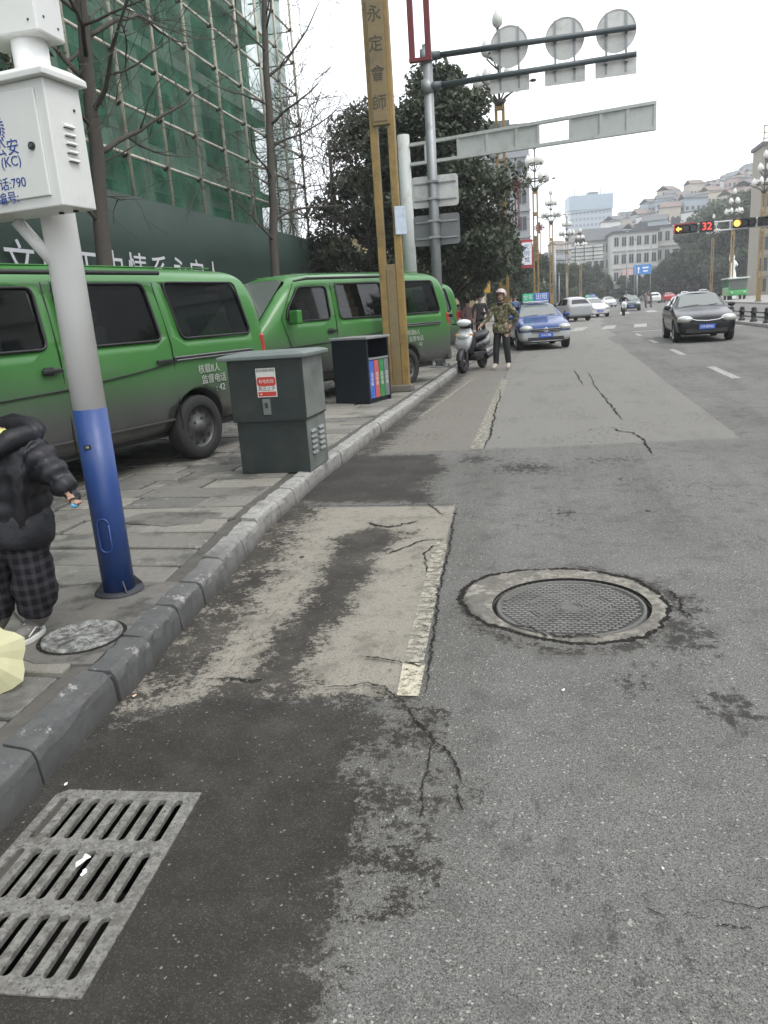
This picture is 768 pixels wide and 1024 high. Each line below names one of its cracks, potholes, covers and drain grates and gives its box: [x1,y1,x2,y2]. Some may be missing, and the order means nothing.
crack [683,899,768,929]
drain grate [0,789,202,1000]
crack [484,390,501,448]
crack [574,370,622,419]
manhole cover [36,619,127,655]
manhole cover [455,567,673,645]
crack [325,503,465,821]
